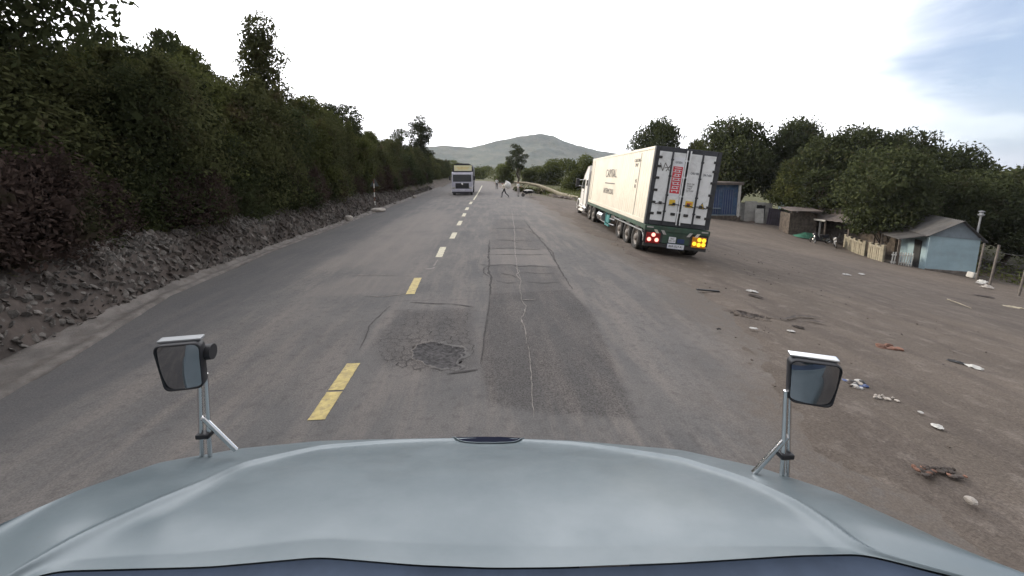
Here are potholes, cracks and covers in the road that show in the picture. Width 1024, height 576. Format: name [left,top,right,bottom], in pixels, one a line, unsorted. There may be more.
pothole [732,309,773,322]
crack [360,215,573,410]
pothole [410,341,472,375]
